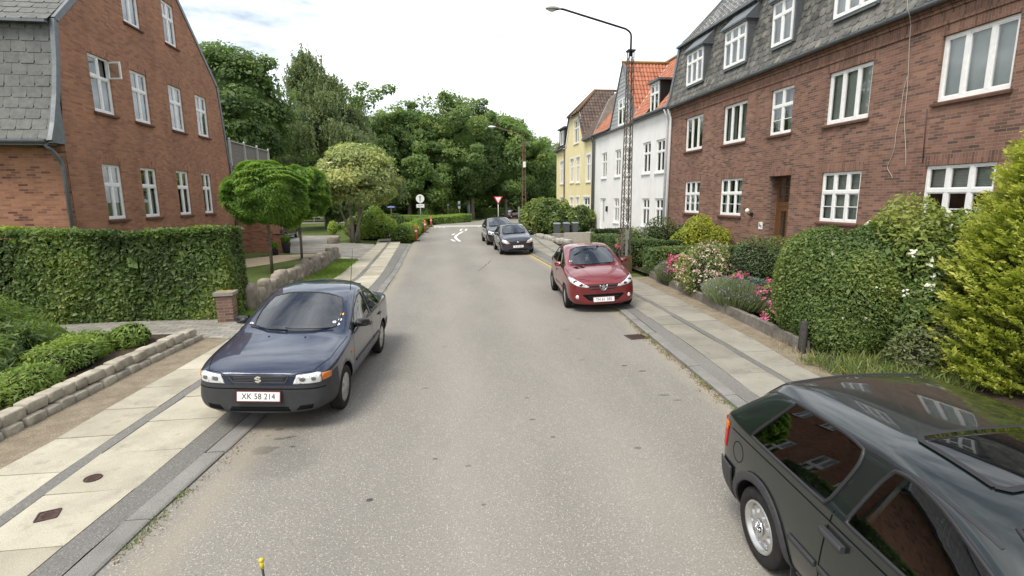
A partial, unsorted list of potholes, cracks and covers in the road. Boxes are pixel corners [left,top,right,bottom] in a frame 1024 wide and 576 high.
manhole cover [33,508,62,523]
manhole cover [83,474,103,483]
